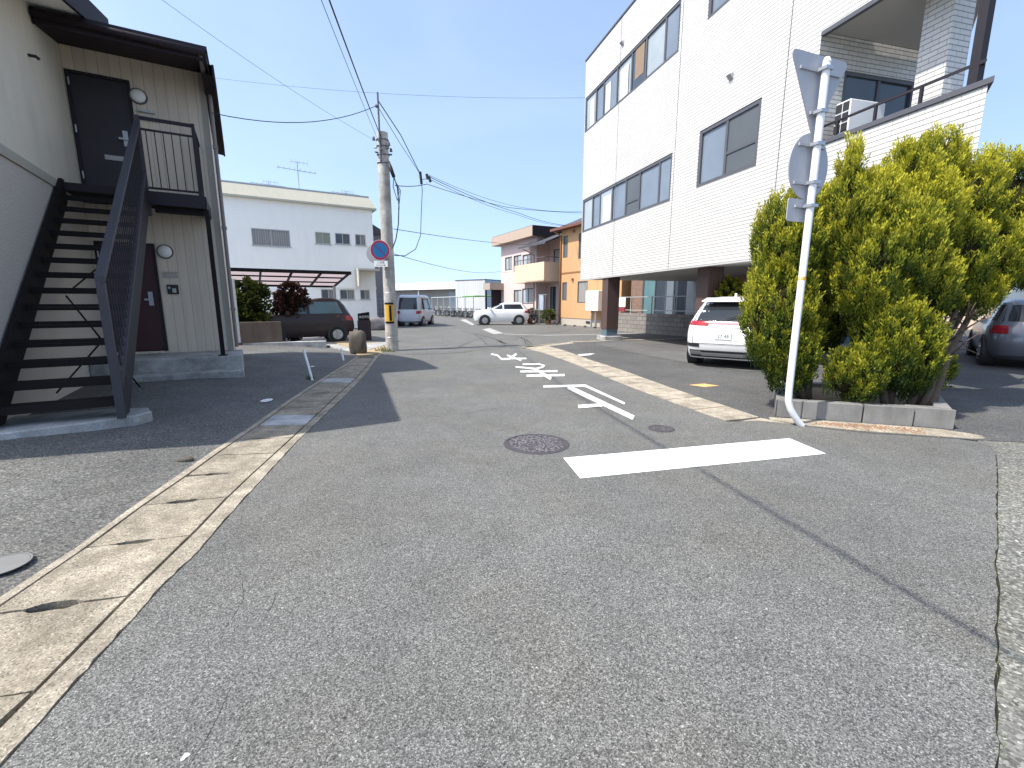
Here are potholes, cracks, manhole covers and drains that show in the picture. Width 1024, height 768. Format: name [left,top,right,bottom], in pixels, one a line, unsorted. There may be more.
manhole cover [0,552,33,574]
manhole cover [503,434,570,455]
